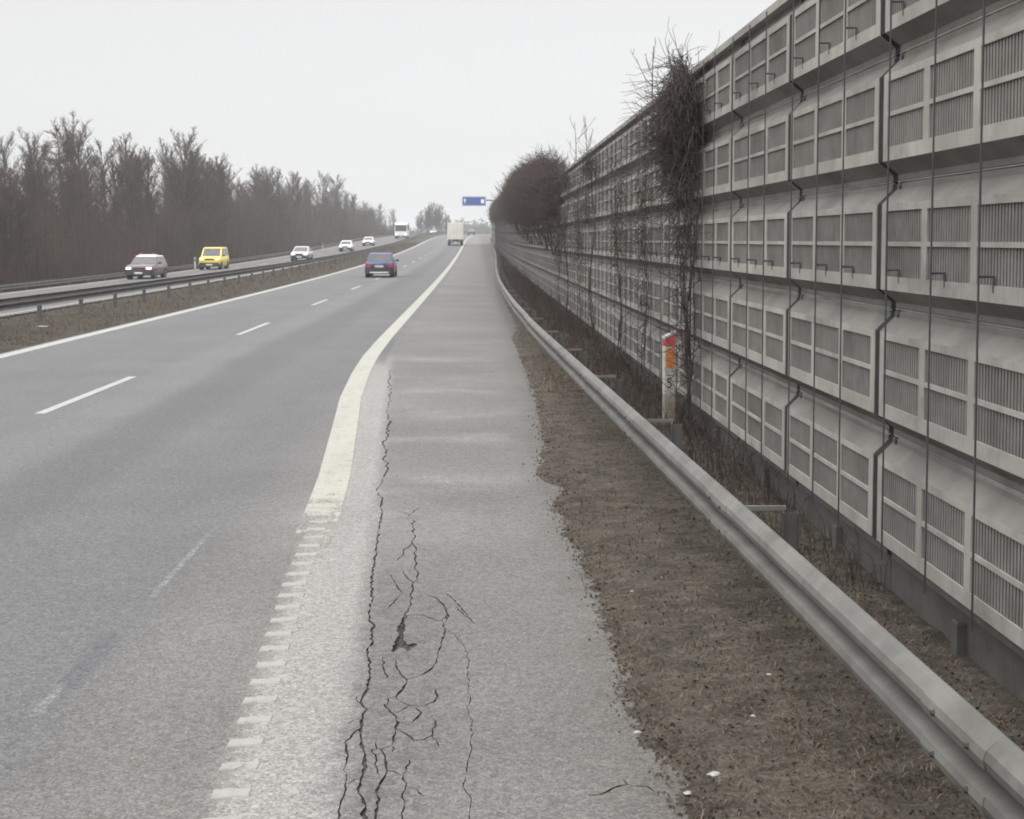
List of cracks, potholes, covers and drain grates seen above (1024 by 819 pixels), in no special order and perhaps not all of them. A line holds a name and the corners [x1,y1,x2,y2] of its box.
crack [338,371,476,819]
crack [589,781,655,796]
